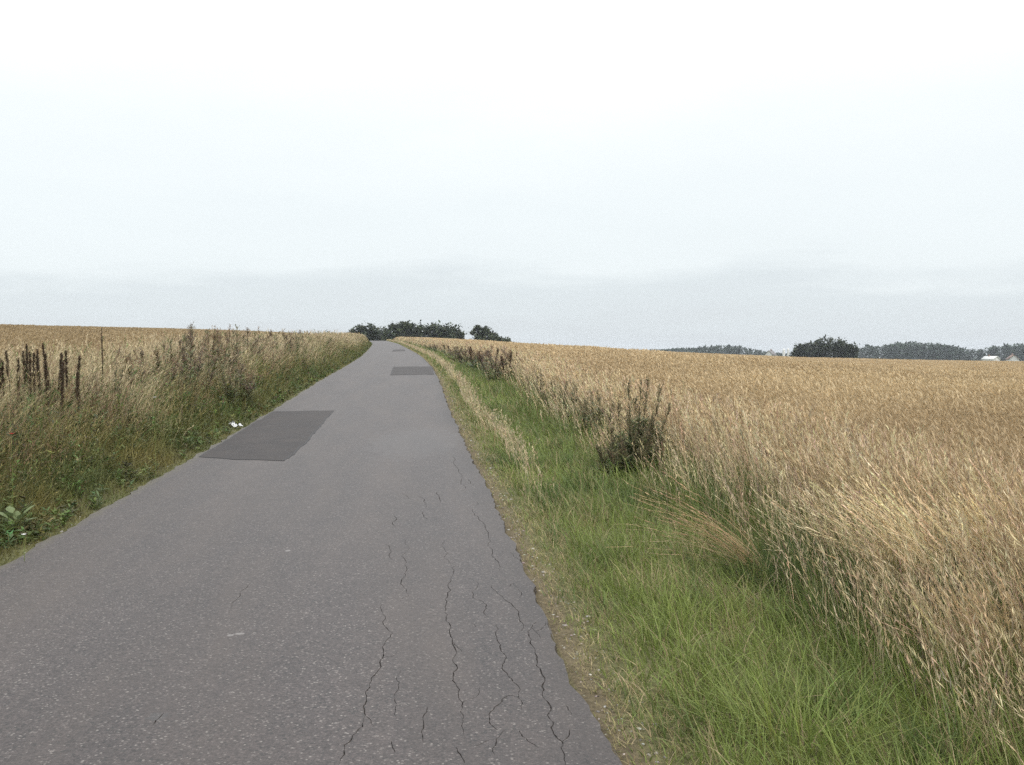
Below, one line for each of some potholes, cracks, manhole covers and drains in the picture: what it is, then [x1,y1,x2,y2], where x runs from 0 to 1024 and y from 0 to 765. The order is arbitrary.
crack [340,544,409,760]
crack [442,510,572,765]
